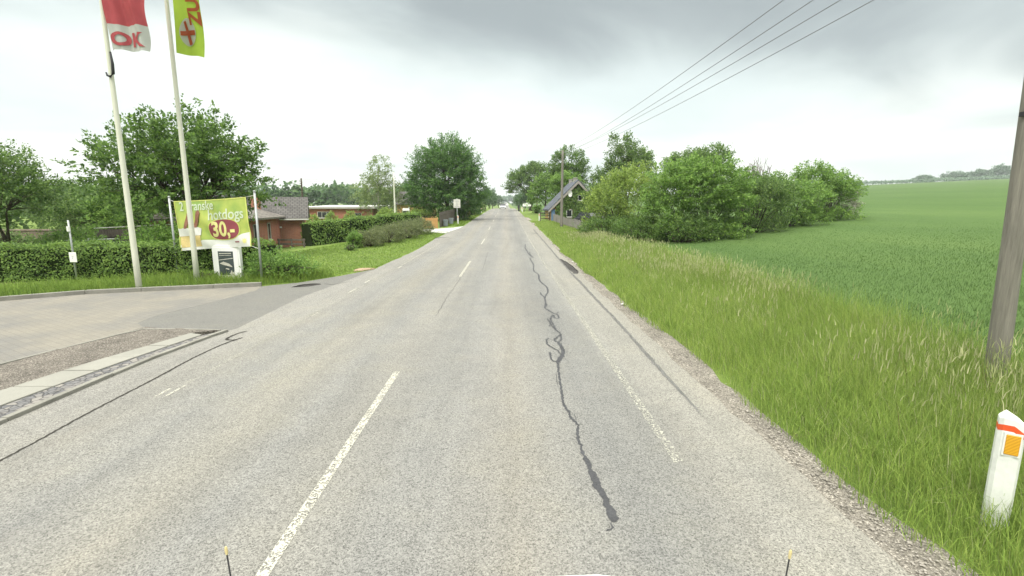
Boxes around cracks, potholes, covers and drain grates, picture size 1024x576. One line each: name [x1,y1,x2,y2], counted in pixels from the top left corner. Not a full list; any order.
crack [535,231,701,415]
